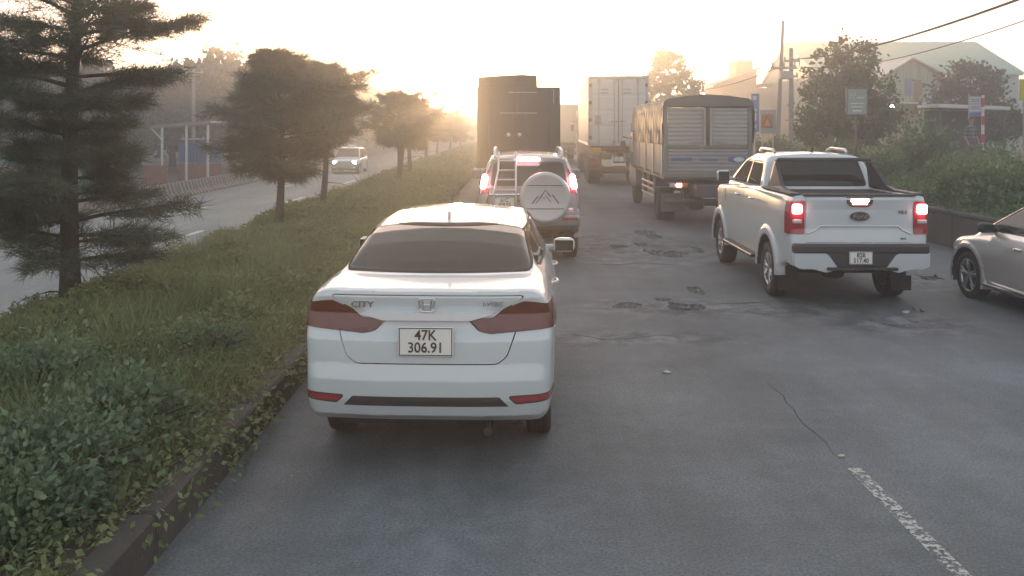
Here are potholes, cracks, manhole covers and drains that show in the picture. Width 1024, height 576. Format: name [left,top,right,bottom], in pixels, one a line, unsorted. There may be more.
pothole [634,229,663,239]
crack [767,380,834,455]
pothole [643,247,689,258]
pothole [667,300,706,313]
